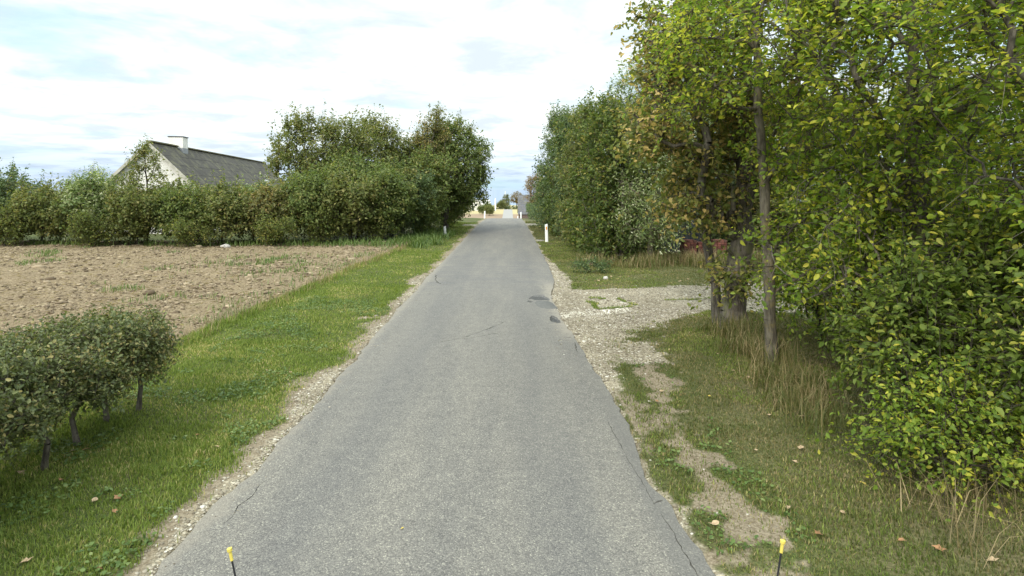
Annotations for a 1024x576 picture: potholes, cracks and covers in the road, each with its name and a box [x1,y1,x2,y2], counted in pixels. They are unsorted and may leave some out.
crack [608,423,698,576]
